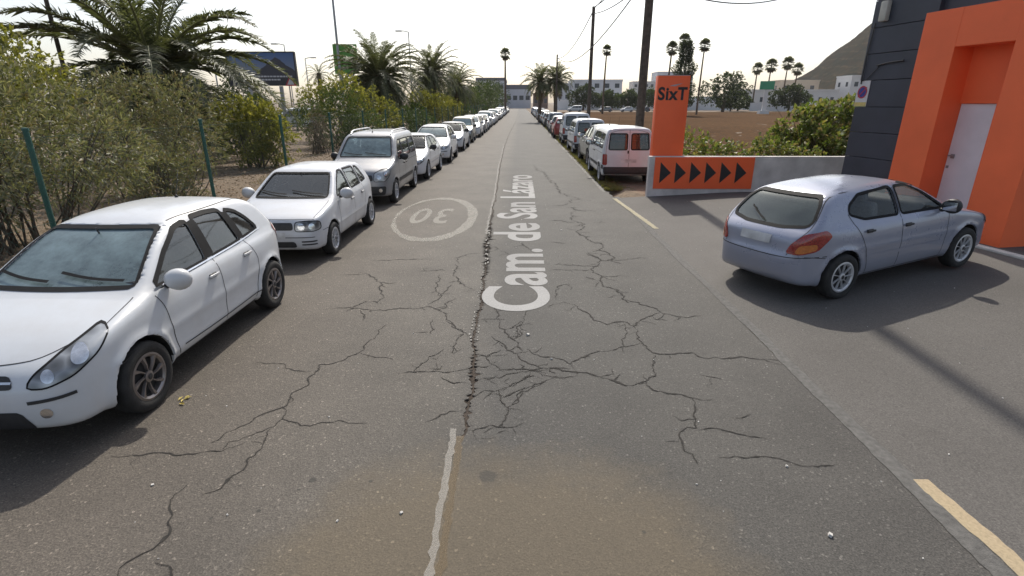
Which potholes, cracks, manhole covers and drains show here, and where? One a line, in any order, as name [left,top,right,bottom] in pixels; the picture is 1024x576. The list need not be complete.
crack [719,456,835,467]
crack [117,488,184,576]
crack [114,326,391,494]
crack [346,168,777,462]
